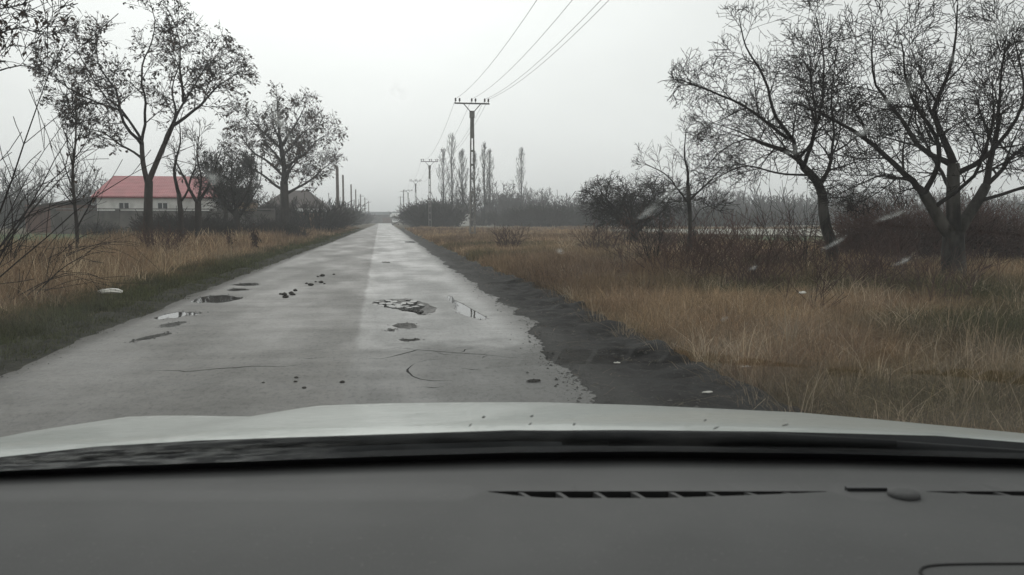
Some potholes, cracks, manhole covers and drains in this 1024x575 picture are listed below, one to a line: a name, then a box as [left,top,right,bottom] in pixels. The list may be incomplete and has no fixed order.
pothole [154,311,201,319]
pothole [130,333,171,342]
crack [378,348,527,388]
pothole [372,299,437,315]
crack [150,357,326,372]
pothole [447,295,488,319]
pothole [191,295,243,303]
